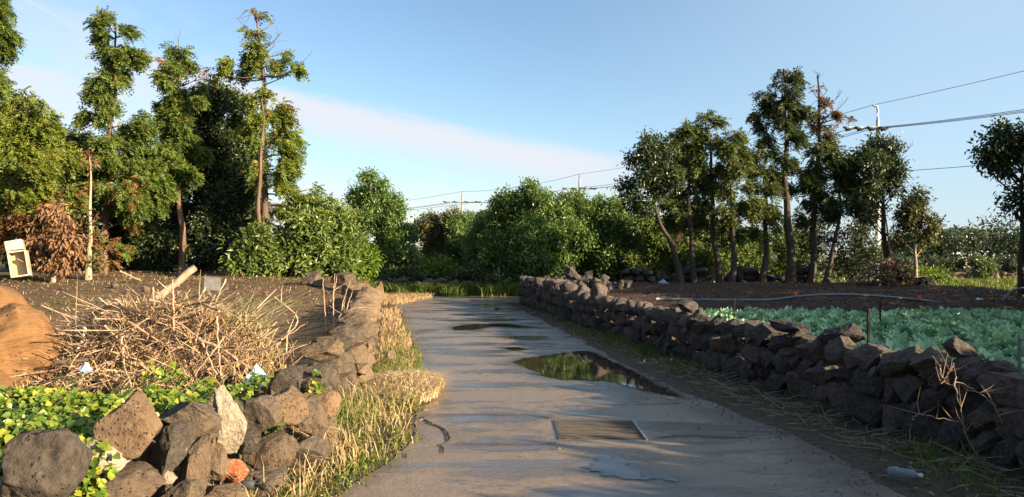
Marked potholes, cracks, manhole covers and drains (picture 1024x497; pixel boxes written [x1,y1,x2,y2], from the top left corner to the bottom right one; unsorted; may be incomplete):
crack [392,418,452,460]
drain grate [553,420,648,440]
